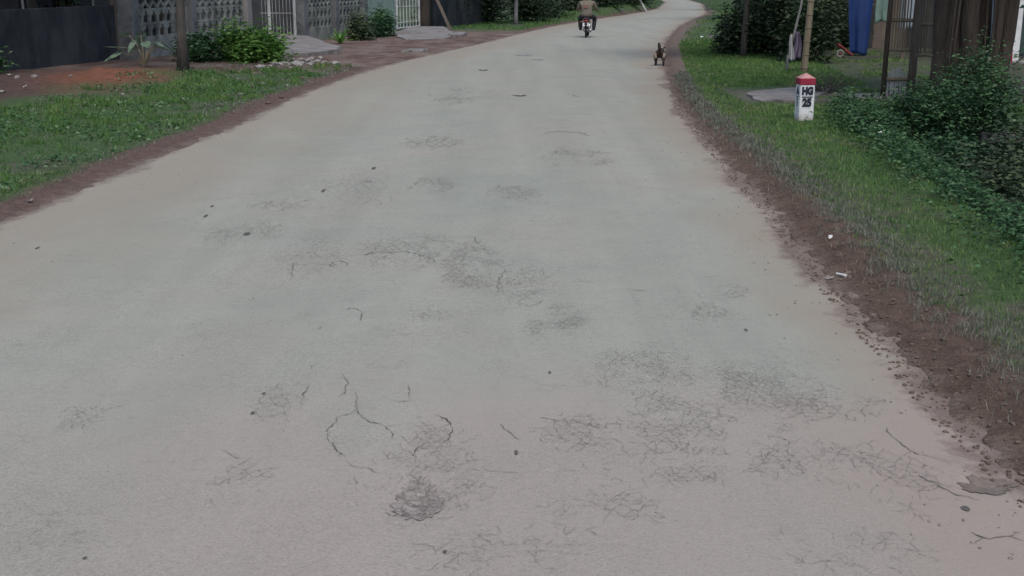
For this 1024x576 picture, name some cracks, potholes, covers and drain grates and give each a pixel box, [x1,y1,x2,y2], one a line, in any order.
crack [246,361,321,422]
crack [205,449,283,503]
crack [55,405,134,429]
crack [405,135,464,150]
crack [271,236,588,335]
crack [529,343,976,534]
crack [548,131,614,166]
crack [327,374,540,527]
